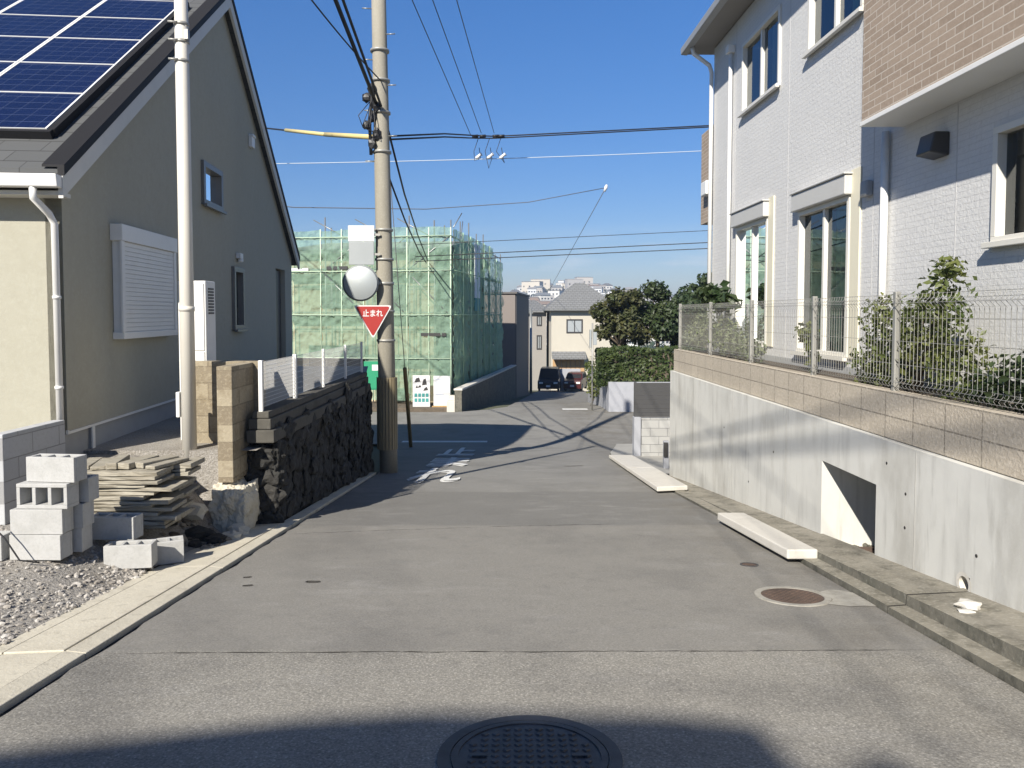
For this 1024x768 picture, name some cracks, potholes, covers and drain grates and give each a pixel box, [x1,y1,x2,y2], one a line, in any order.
manhole cover [754,586,832,607]
manhole cover [437,715,623,768]
